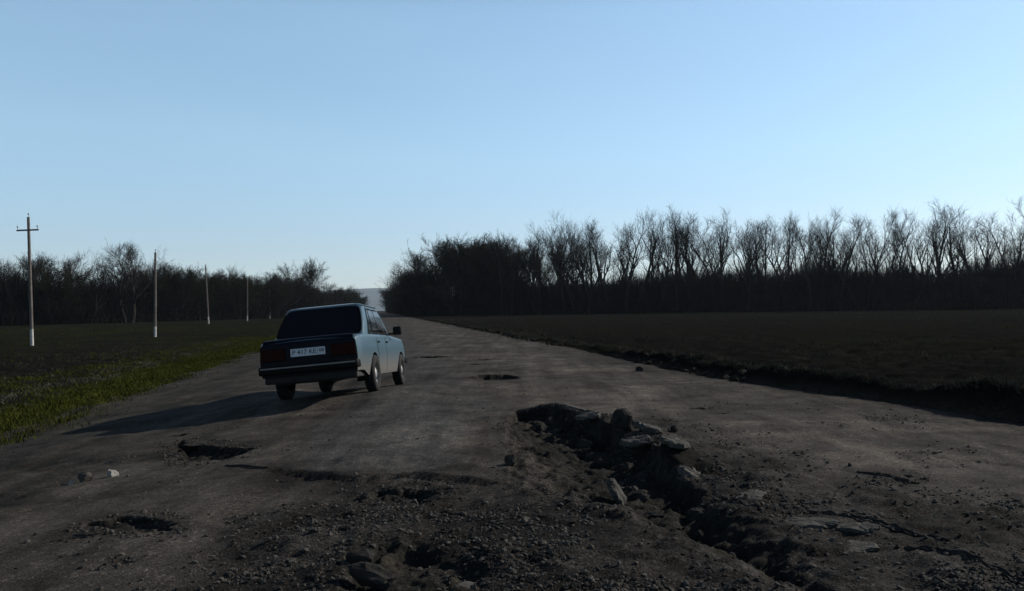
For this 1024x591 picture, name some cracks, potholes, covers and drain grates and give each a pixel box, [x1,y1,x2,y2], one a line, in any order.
pothole [161,439,263,465]
crack [857,470,920,484]
pothole [487,403,878,591]
pothole [73,513,189,537]
crack [799,509,1024,586]
